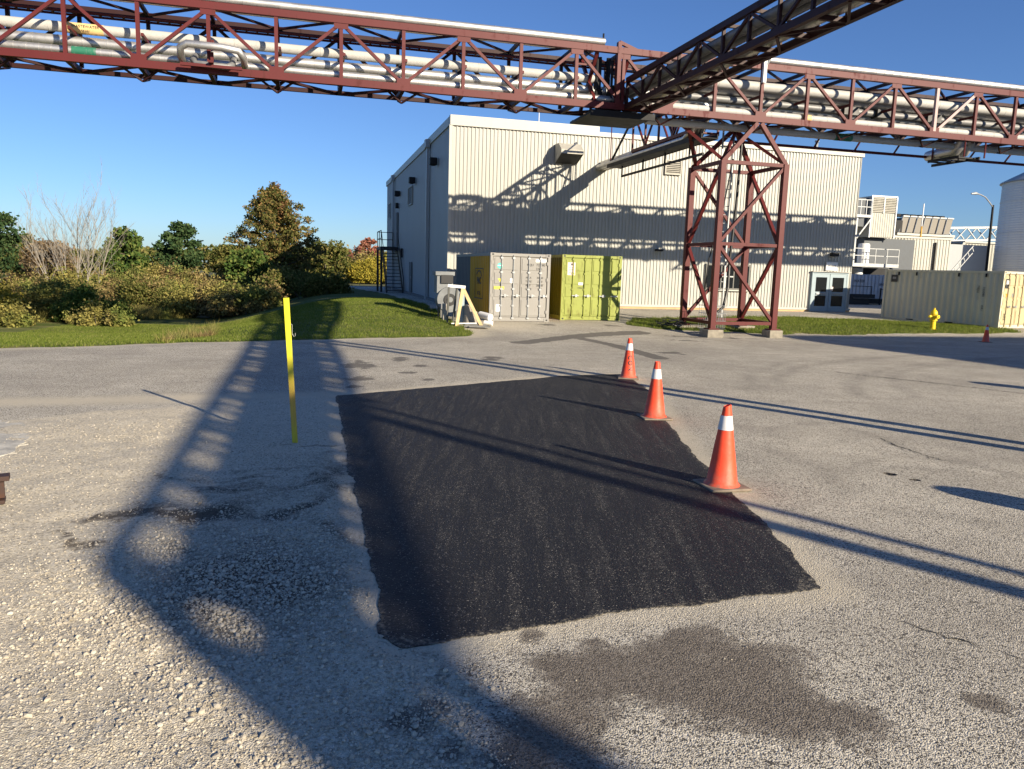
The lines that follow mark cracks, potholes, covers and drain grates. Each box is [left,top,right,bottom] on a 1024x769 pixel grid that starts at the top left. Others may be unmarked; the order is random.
crack [901,621,1024,660]
